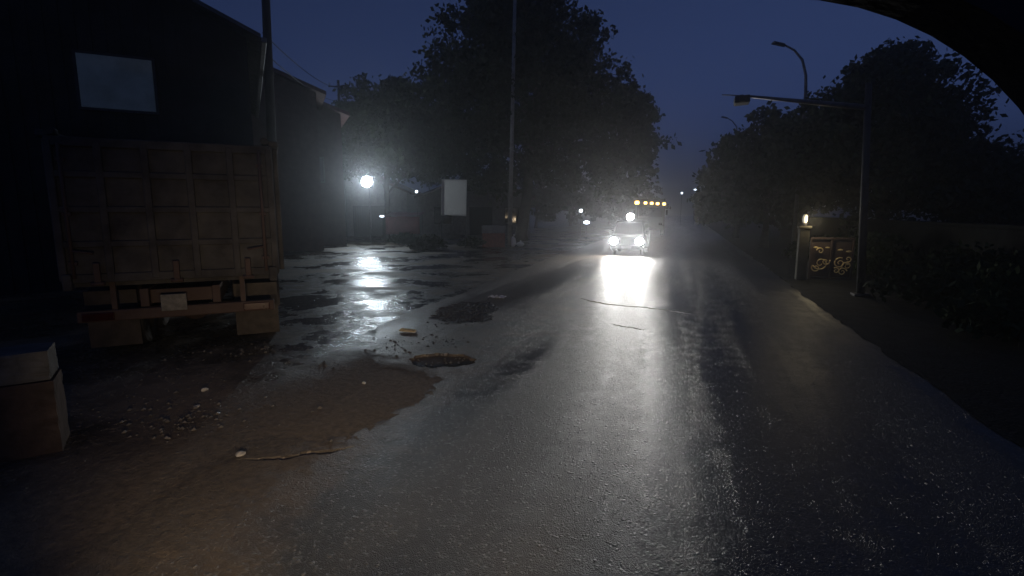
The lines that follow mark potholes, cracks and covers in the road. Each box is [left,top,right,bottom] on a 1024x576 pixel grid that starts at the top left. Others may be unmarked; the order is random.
pothole [409,353,477,368]
crack [580,298,688,330]
pothole [428,301,498,323]
crack [236,446,355,461]
